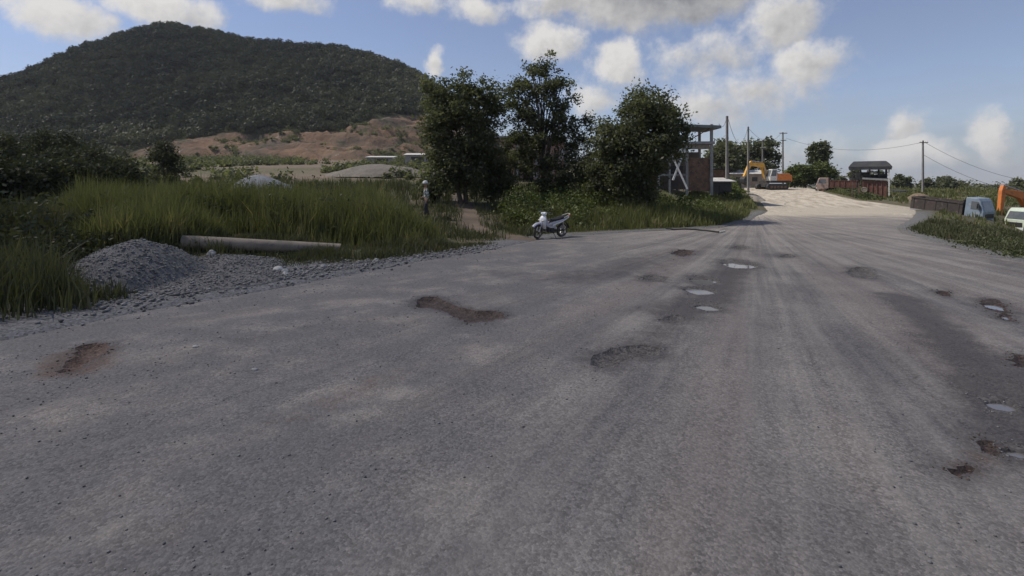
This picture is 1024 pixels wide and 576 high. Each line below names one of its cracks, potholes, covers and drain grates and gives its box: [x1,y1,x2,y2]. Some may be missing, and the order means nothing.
pothole [965,392,1024,420]
pothole [686,299,726,312]
pothole [408,296,510,326]
pothole [677,286,726,296]
pothole [843,266,885,279]
pothole [581,344,663,369]
pothole [1005,351,1024,367]
pothole [638,274,672,282]
pothole [671,249,696,257]
pothole [974,299,1023,316]
pothole [45,340,123,377]
pothole [715,259,765,270]
